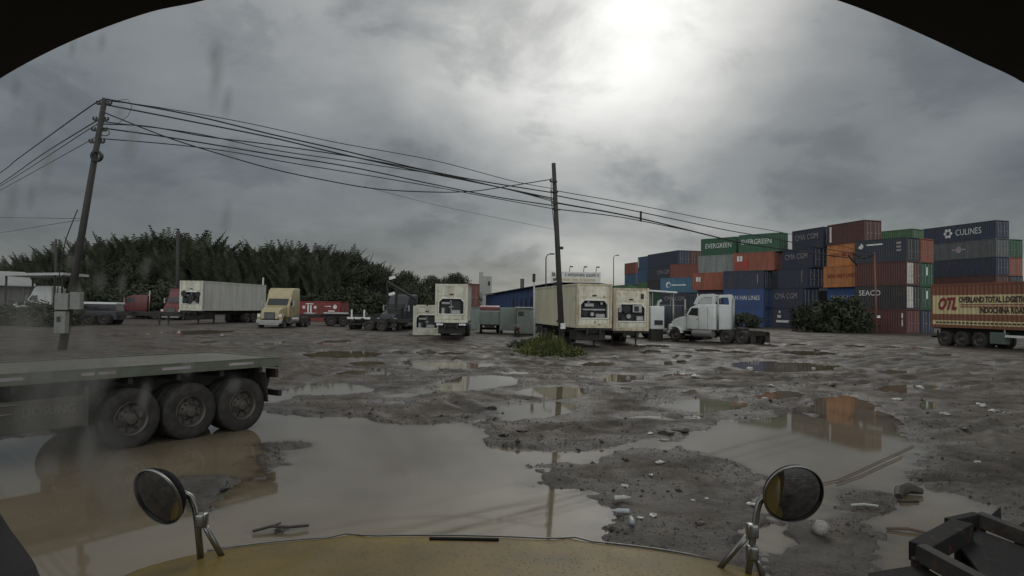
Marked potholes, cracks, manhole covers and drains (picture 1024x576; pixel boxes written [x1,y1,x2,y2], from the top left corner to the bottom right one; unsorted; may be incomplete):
pothole [481,398,589,423]
pothole [393,360,511,371]
pothole [715,359,851,373]
pothole [297,349,391,358]
pothole [737,386,819,402]
pothole [424,373,528,393]
pothole [661,391,948,576]
pothole [503,383,601,400]
pothole [581,370,661,383]
pothole [0,406,679,576]
pothole [283,379,385,396]
pothole [866,380,953,394]
